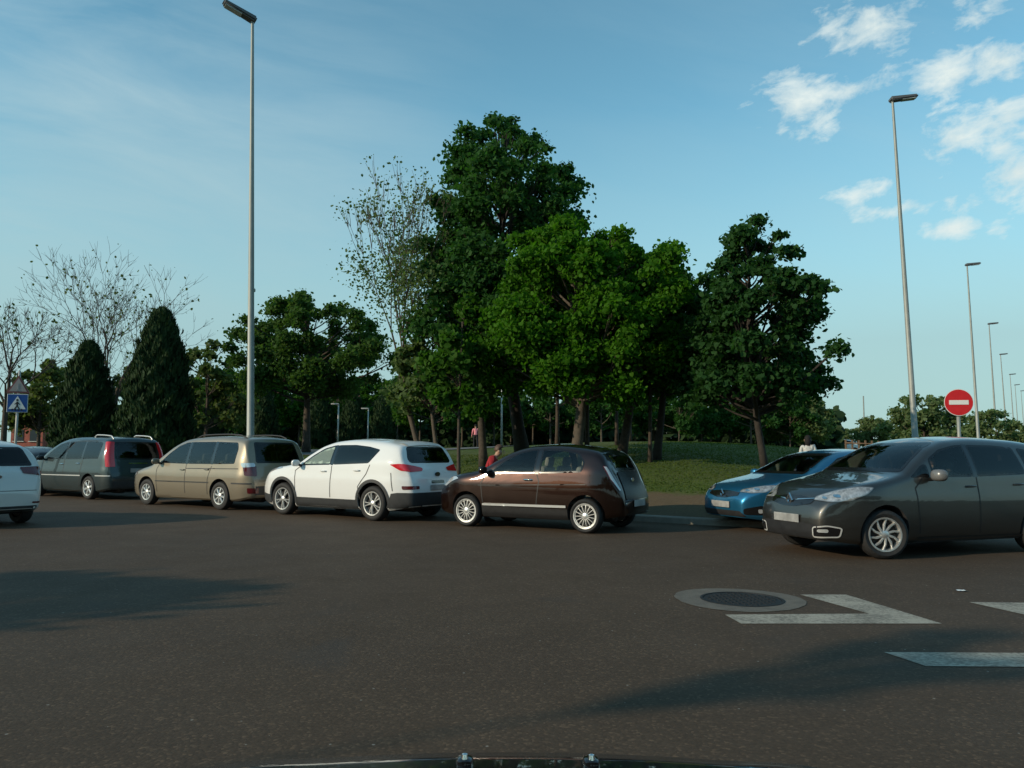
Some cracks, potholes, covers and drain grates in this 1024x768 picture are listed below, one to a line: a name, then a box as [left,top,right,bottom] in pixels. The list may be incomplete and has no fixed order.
manhole cover [674,588,807,612]
